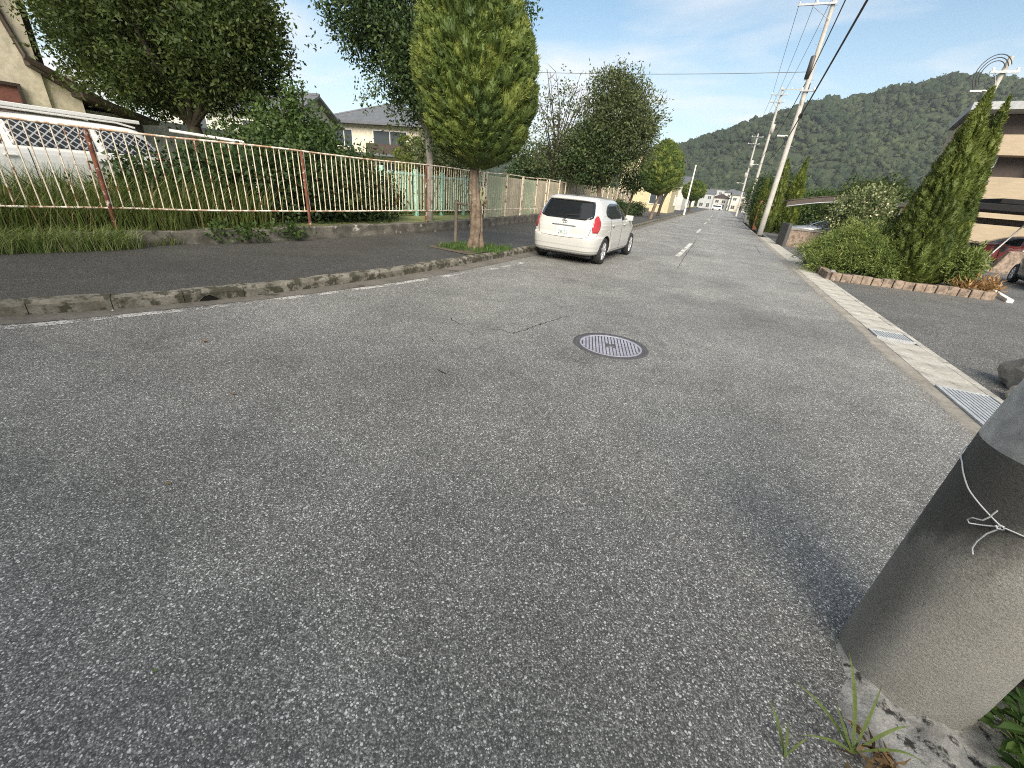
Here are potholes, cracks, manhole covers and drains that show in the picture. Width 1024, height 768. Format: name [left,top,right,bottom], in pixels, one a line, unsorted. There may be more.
drain grate [934,384,1002,427]
drain grate [868,328,916,345]
manhole cover [573,333,649,360]
crack [449,315,571,334]
